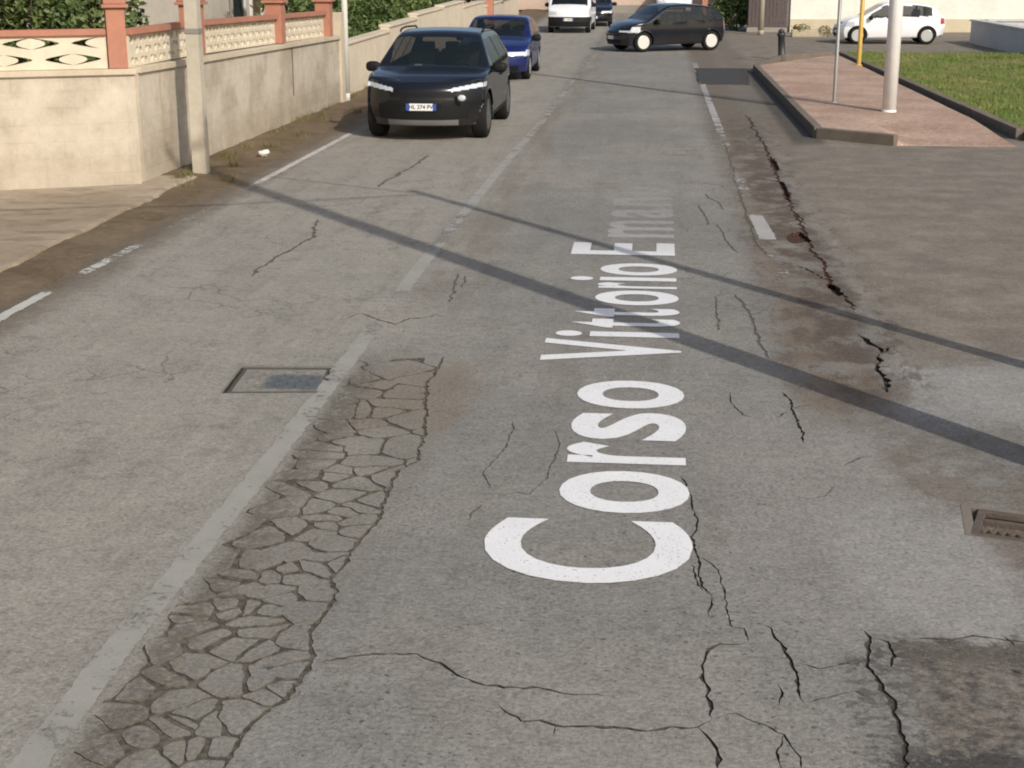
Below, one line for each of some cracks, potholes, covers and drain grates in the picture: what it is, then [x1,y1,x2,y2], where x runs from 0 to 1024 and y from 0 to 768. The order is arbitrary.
drain grate [960,504,1024,543]
crack [252,220,318,277]
crack [42,357,1023,768]
crack [698,115,856,310]
crack [378,155,428,187]
crack [714,295,769,358]
crack [857,334,892,393]
manhole cover [220,366,334,393]
